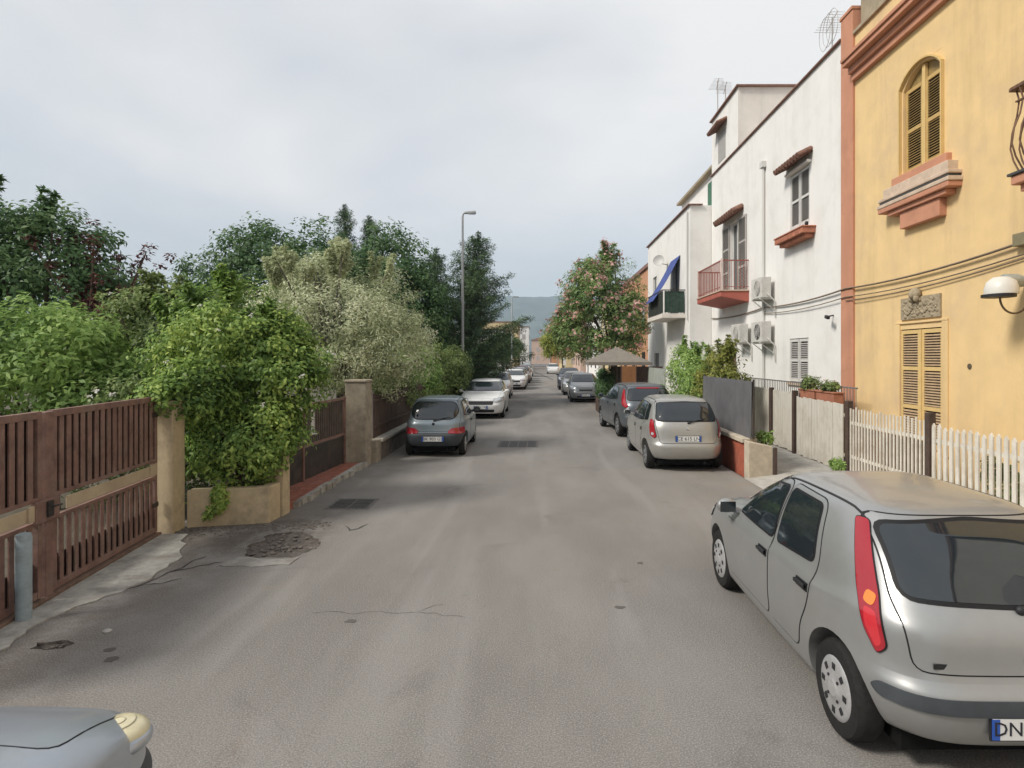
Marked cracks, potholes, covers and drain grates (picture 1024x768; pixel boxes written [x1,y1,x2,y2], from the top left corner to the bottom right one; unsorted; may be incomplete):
pothole [30,640,74,650]
crack [130,557,218,588]
pothole [244,531,321,558]
